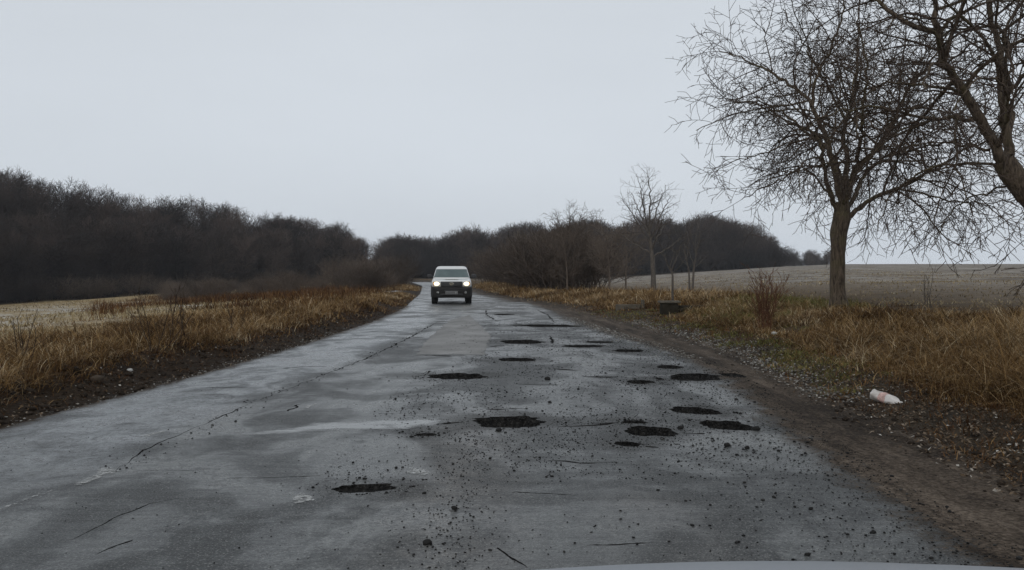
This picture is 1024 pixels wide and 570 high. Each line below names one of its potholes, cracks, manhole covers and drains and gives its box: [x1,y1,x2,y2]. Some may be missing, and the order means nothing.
crack [61,498,178,554]
pothole [624,426,679,437]
pothole [670,406,723,415]
pothole [699,420,753,434]
pothole [331,483,396,493]
pothole [670,373,721,381]
pothole [472,416,547,428]
